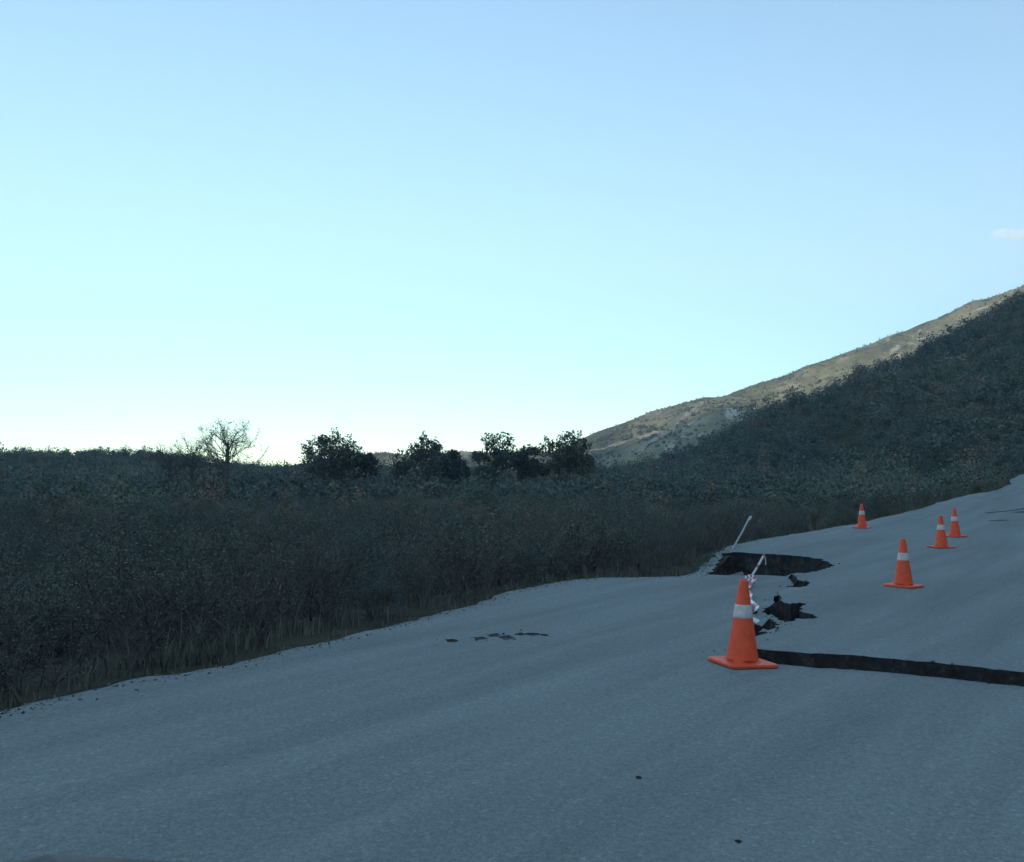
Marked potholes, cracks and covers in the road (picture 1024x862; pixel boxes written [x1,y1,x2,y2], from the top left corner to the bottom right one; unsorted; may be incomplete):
pothole [706,552,835,576]
pothole [754,619,780,633]
crack [755,632,1024,687]
pothole [763,600,819,622]
